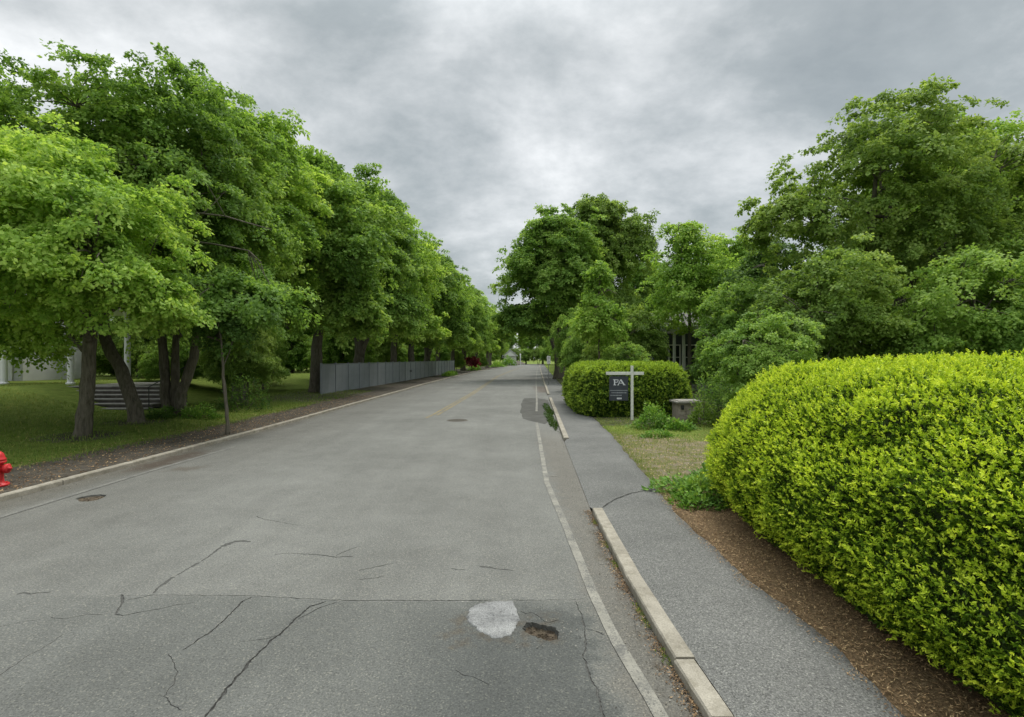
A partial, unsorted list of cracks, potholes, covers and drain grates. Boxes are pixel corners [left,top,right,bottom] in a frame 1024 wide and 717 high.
pothole [522,622,559,641]
crack [281,547,393,580]
crack [0,540,336,717]
crack [576,602,606,717]
